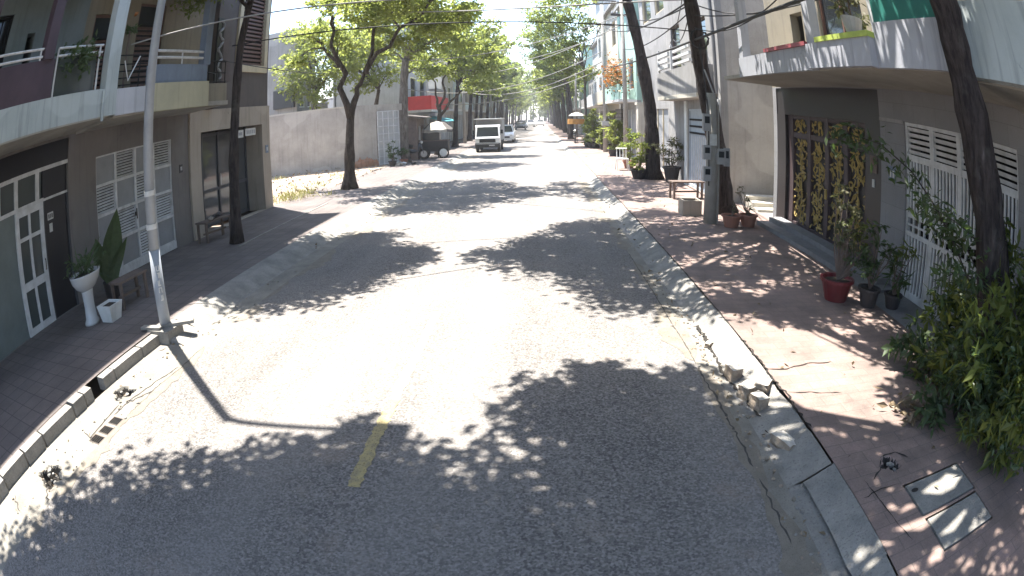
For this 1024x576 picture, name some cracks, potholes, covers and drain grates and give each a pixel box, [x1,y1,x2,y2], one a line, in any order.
pothole [870,450,910,478]
crack [84,347,204,442]
pothole [33,460,69,492]
manhole cover [904,464,973,519]
manhole cover [927,492,991,552]
pothole [106,385,140,403]
crack [629,254,791,542]
drain grate [89,434,106,445]
